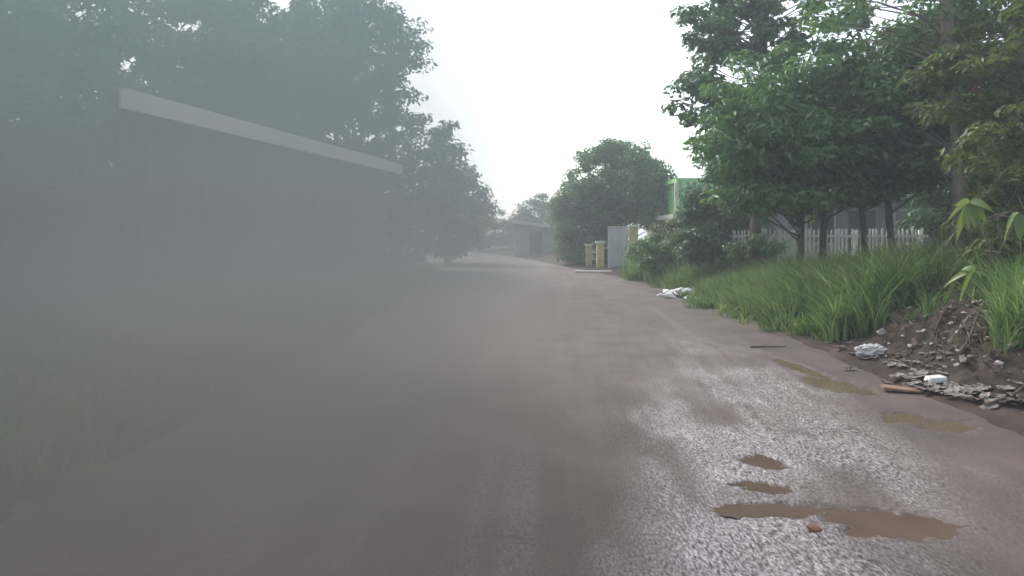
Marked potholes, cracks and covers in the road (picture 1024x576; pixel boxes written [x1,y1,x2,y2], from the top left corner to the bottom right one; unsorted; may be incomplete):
pothole [678,497,1002,550]
pothole [873,409,1001,437]
pothole [759,352,889,398]
pothole [720,478,810,496]
pothole [727,451,805,474]
